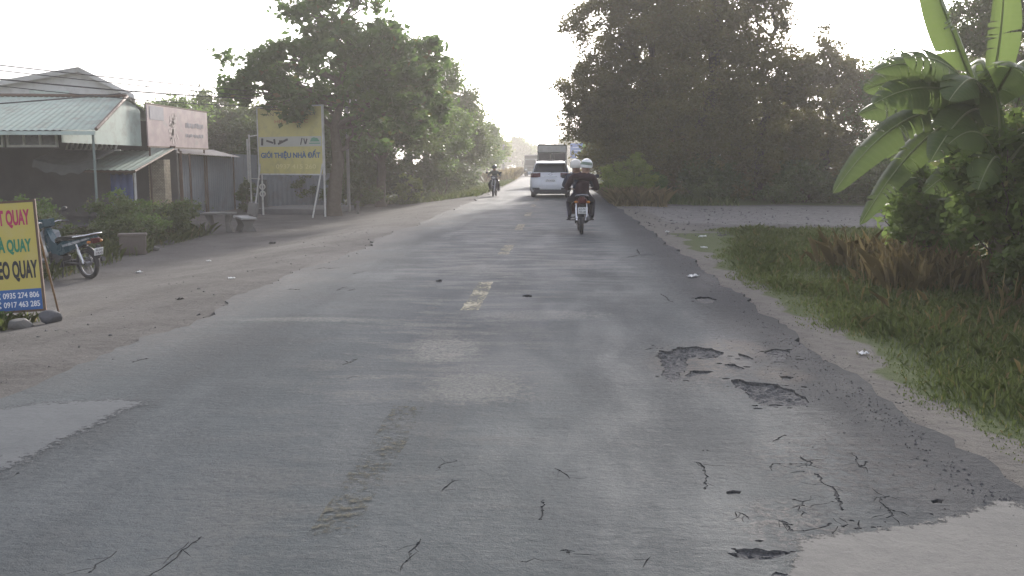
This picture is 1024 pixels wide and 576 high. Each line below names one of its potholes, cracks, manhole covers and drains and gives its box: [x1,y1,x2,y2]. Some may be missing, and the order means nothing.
crack [521,549,598,562]
pothole [728,540,795,576]
pothole [722,378,809,409]
crack [148,536,202,576]
crack [732,435,950,534]
crack [696,450,713,490]
crack [396,539,421,571]
pothole [655,346,724,383]
